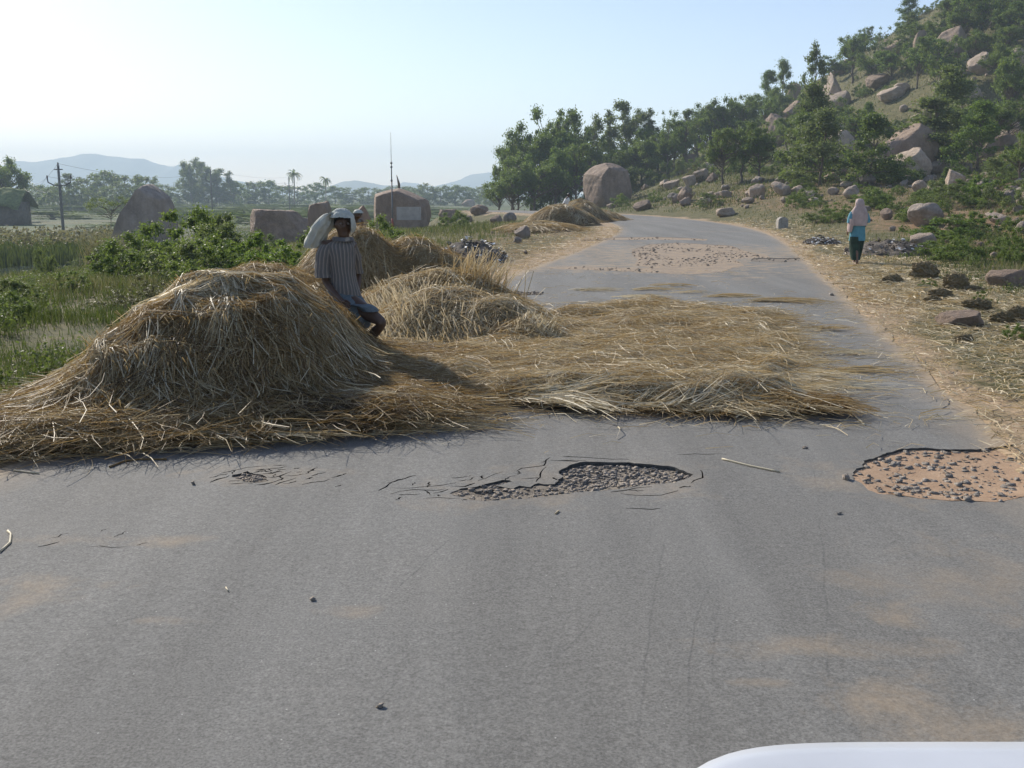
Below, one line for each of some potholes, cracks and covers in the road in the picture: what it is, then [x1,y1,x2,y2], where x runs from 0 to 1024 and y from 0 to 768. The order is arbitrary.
pothole [232,471,268,483]
crack [378,454,704,510]
pothole [852,445,1024,502]
pothole [450,461,693,501]
